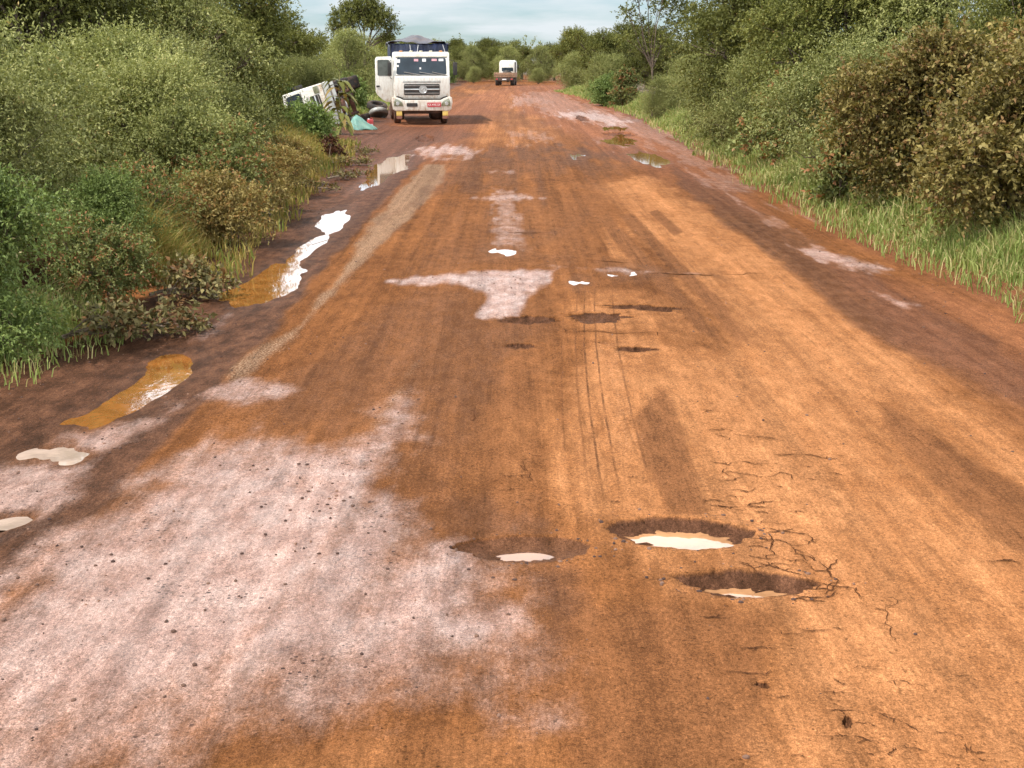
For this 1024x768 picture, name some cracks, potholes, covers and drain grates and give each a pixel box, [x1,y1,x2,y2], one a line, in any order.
pothole [588,301,696,316]
pothole [486,312,573,329]
crack [736,627,839,651]
pothole [493,339,548,354]
crack [703,409,844,513]
pothole [431,529,609,571]
crack [738,520,865,602]
pothole [587,509,777,559]
pothole [557,309,650,328]
pothole [649,562,843,607]
crack [820,597,1007,760]
pothole [599,342,674,357]
